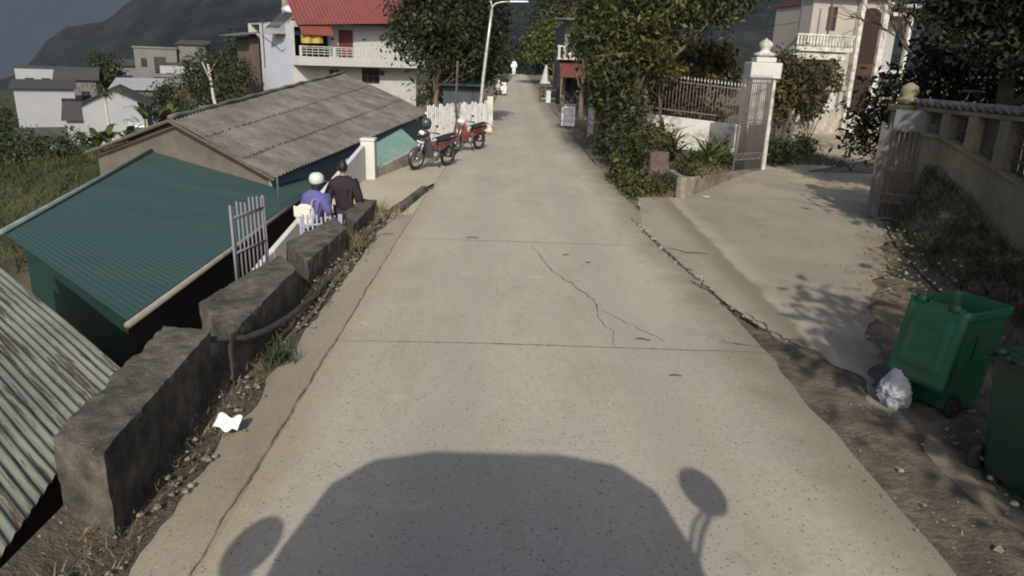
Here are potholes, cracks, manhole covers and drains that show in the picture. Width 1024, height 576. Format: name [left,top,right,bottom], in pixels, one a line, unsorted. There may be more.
crack [533,219,828,364]
